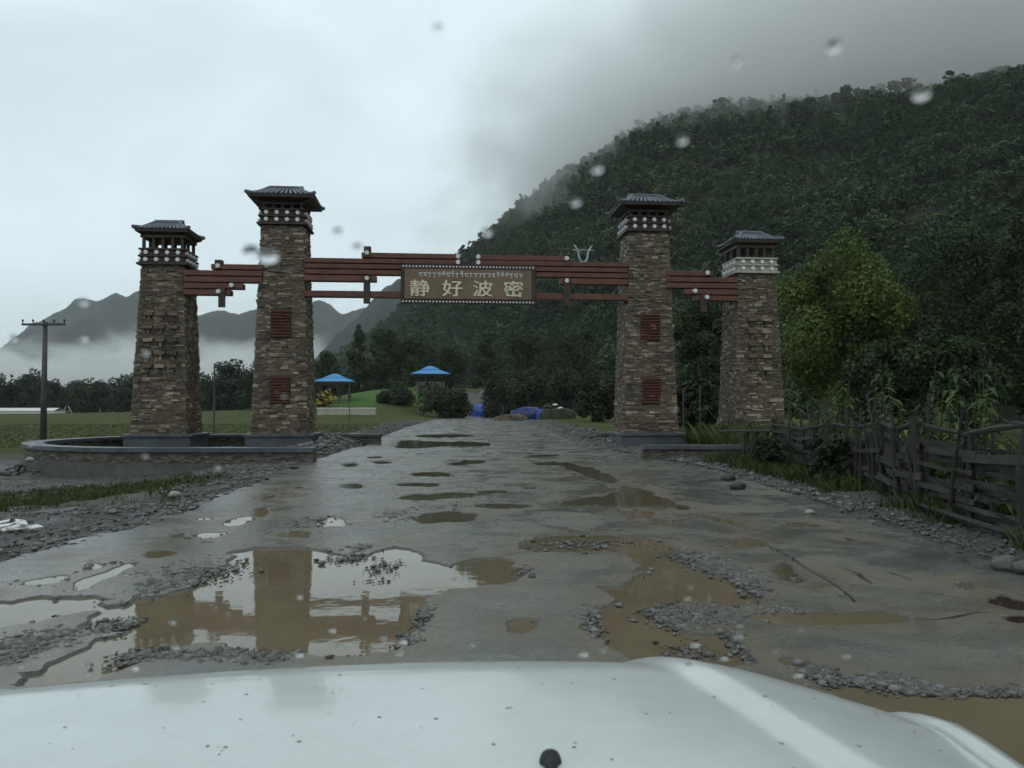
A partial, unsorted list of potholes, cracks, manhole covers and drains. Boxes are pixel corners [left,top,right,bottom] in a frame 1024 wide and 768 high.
pothole [387,439,494,449]
crack [769,546,912,603]
pothole [517,532,765,667]
pothole [529,461,623,484]
pothole [407,511,481,524]
pothole [0,545,525,687]
pothole [221,515,257,527]
pothole [986,593,1024,611]
pothole [505,618,539,634]
pothole [397,490,511,501]
pothole [557,485,693,510]
